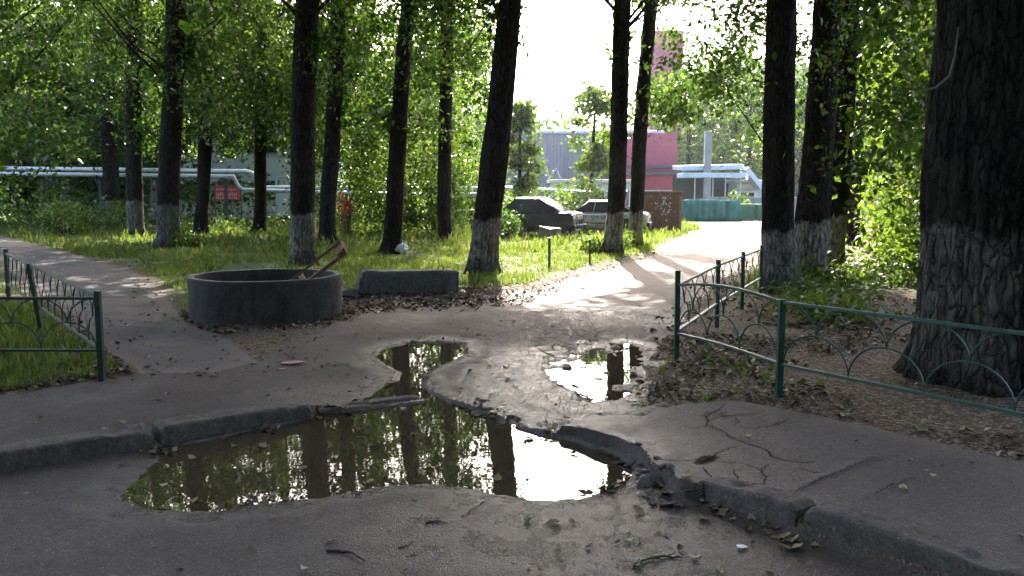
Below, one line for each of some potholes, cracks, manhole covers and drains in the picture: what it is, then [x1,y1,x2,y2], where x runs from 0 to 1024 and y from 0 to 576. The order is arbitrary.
crack [652,404,914,494]
pothole [116,393,695,513]
pothole [352,340,469,402]
pothole [540,341,667,402]
